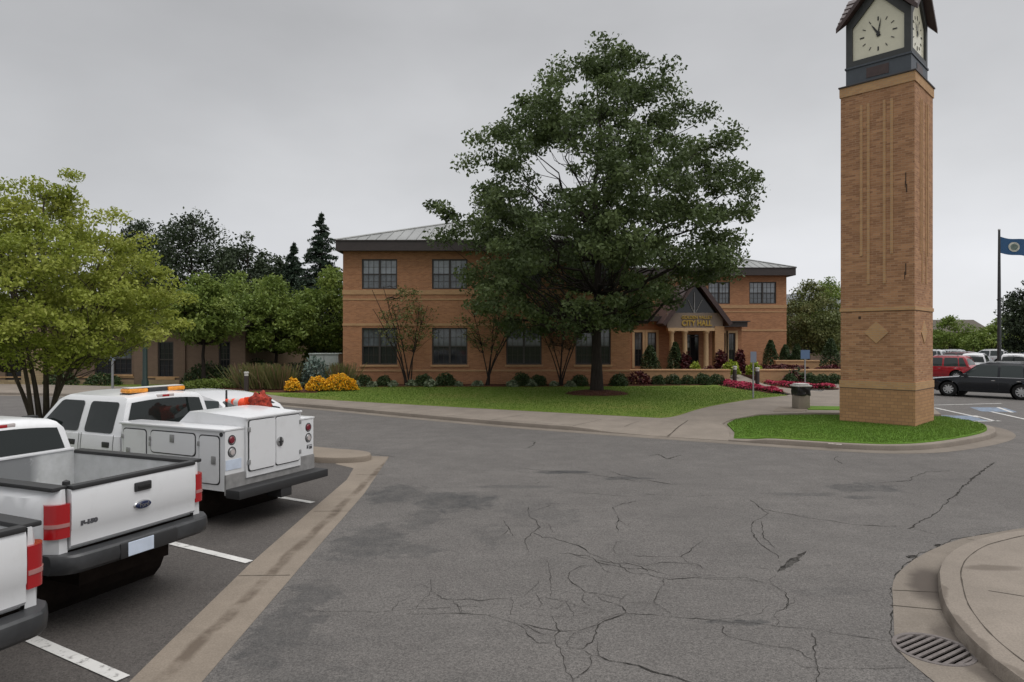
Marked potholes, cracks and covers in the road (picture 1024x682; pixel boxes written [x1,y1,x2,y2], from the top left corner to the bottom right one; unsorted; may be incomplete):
drain grate [891,632,978,667]
crack [326,463,1001,682]
pothole [777,551,806,572]
